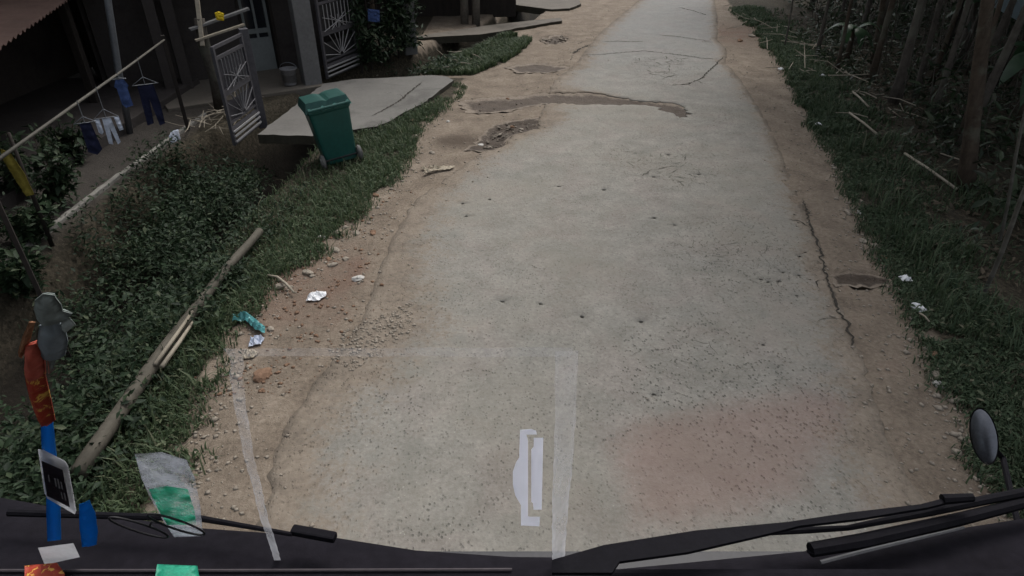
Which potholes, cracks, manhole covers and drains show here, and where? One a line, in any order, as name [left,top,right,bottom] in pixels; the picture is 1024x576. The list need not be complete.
pothole [459,92,690,118]
crack [613,148,711,186]
pothole [830,270,893,289]
crack [573,35,723,85]
crack [791,202,854,350]
pothole [464,117,540,152]
